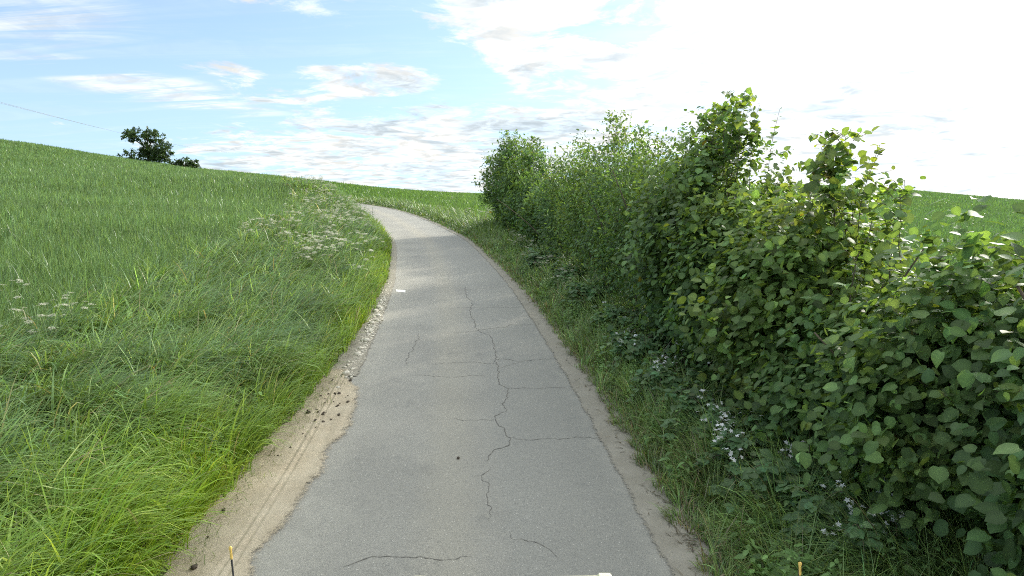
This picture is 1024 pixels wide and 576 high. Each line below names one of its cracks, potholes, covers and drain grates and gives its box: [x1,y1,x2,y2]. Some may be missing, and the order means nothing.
crack [426,286,592,519]
crack [346,555,461,566]
